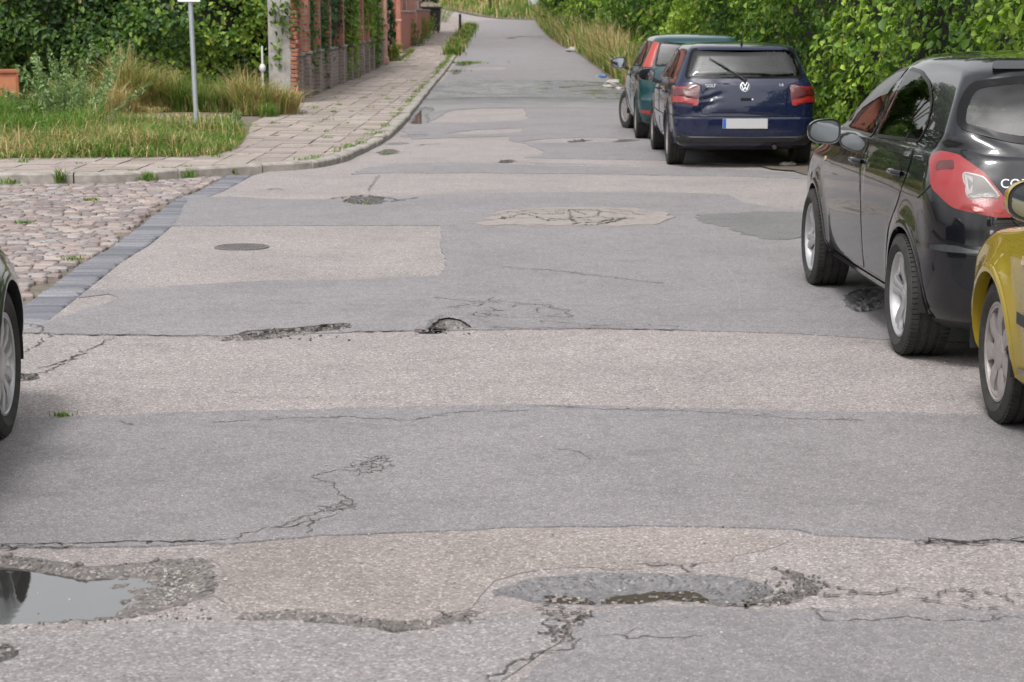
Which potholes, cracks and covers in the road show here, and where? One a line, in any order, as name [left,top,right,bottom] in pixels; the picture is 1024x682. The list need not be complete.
crack [485,603,702,681]
crack [236,455,395,540]
manhole cover [214,243,269,251]
pothole [405,313,496,334]
pothole [217,324,352,341]
pothole [0,552,218,625]
pothole [492,572,773,607]
pothole [341,196,387,205]
crack [23,323,218,378]
pothole [840,288,885,312]
crack [436,297,680,330]
